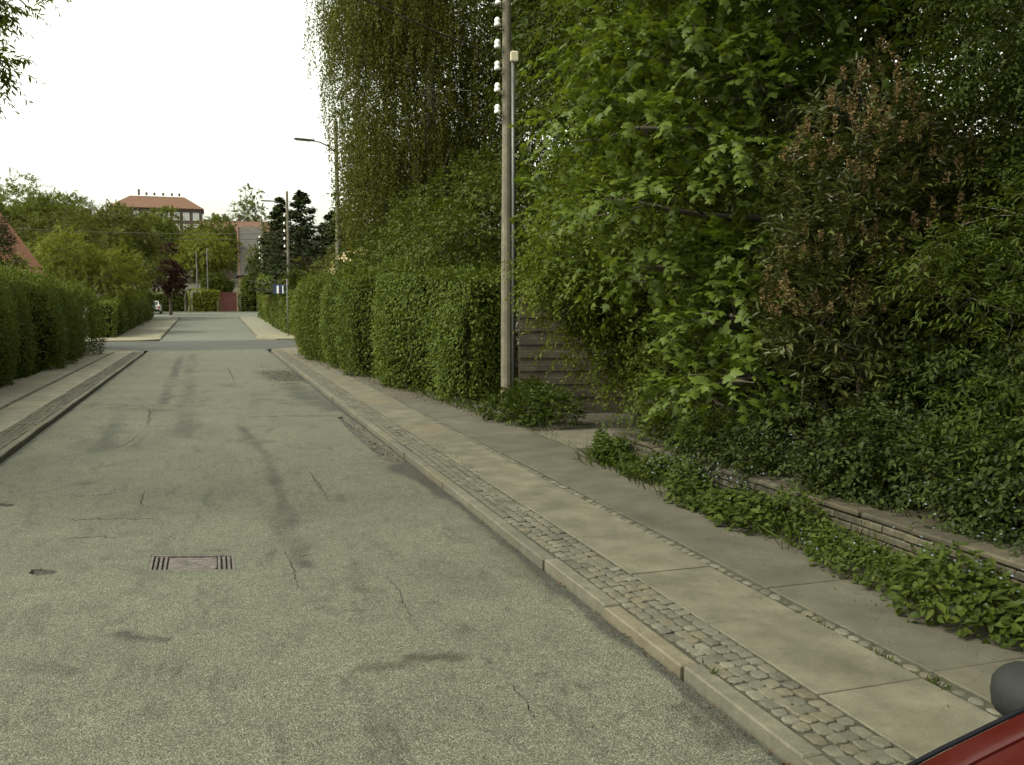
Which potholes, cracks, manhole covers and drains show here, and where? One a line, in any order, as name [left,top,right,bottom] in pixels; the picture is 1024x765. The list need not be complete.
crack [99,404,193,446]
crack [62,492,152,539]
